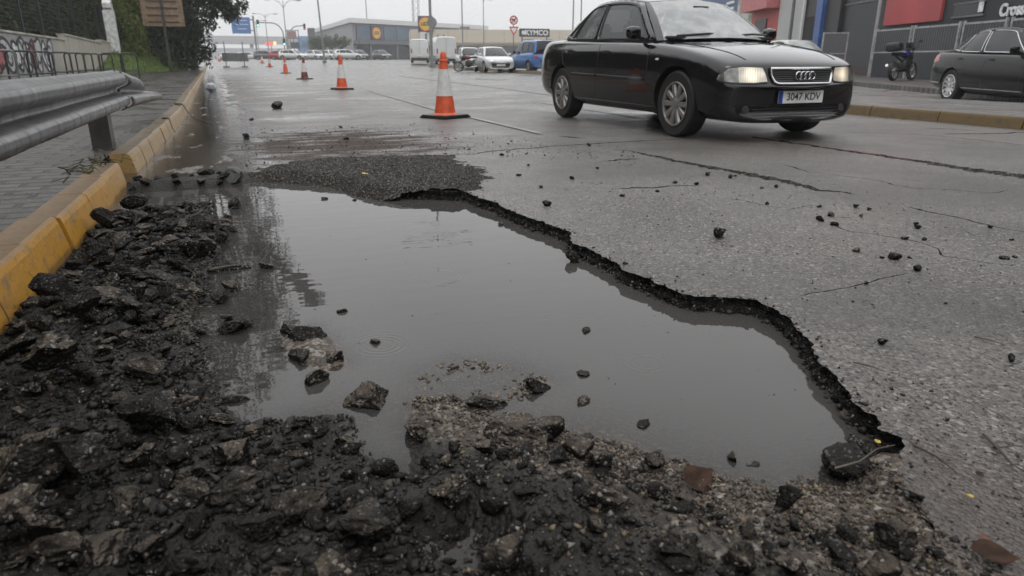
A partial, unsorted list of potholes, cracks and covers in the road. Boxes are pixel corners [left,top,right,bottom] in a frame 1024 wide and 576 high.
crack [467,128,1024,210]
crack [910,207,1024,237]
pothole [0,172,964,576]
crack [801,274,903,296]
crack [836,217,1013,267]
